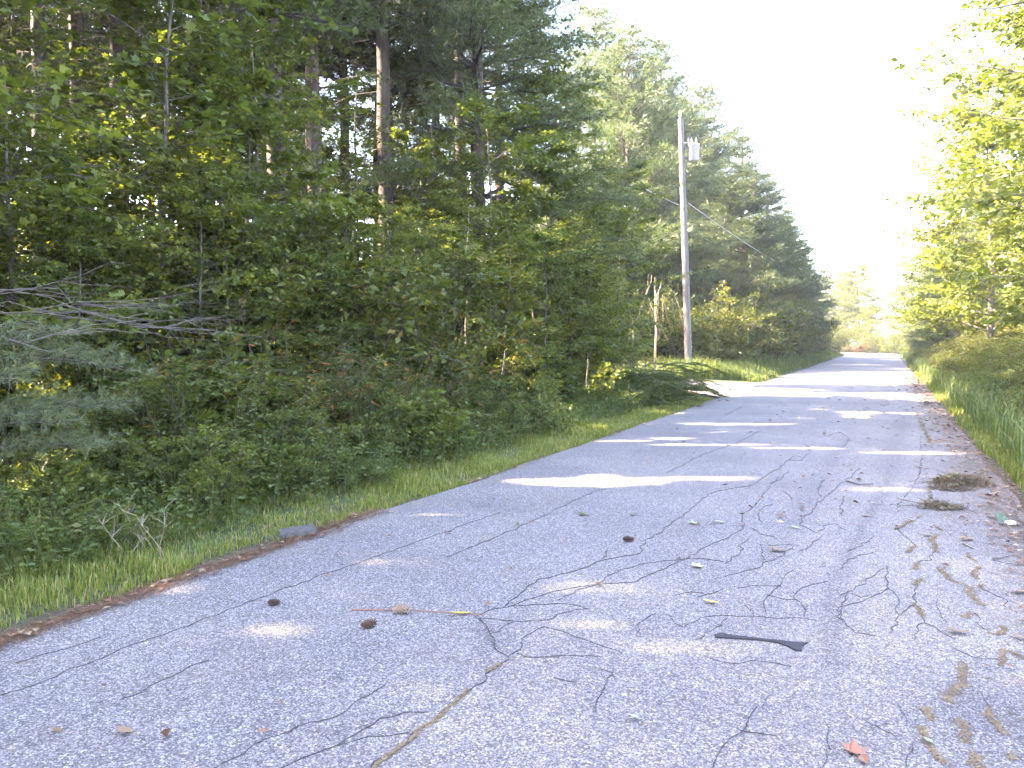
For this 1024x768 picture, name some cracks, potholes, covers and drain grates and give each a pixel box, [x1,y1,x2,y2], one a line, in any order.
crack [16,637,100,663]
crack [119,660,208,700]
crack [669,429,873,667]
crack [215,446,811,768]
